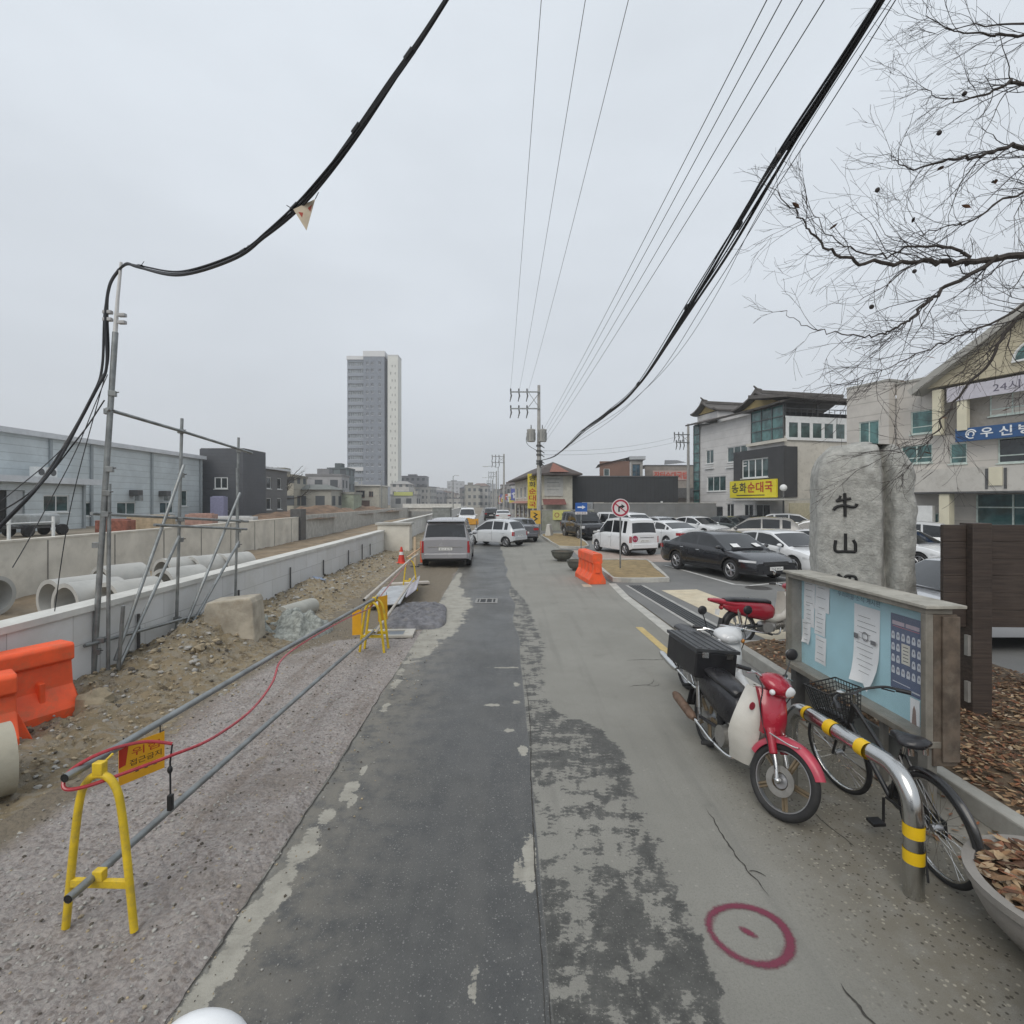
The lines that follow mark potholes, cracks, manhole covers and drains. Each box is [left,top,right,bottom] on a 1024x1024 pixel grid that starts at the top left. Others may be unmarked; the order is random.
crack [841,984,876,1024]
crack [708,812,766,892]
